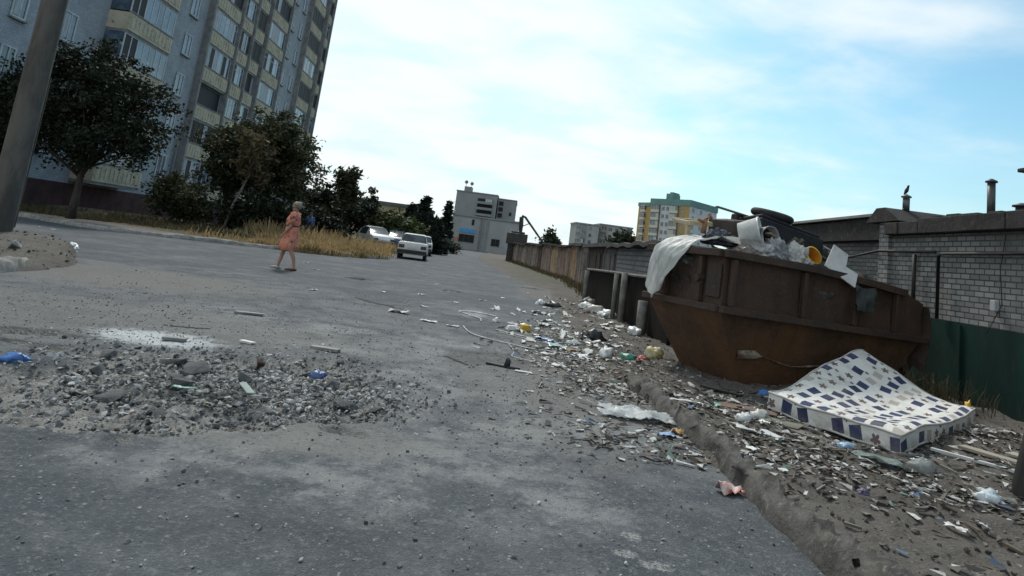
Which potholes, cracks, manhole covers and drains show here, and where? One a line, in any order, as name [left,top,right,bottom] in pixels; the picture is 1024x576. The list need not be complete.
pothole [0,338,427,448]
